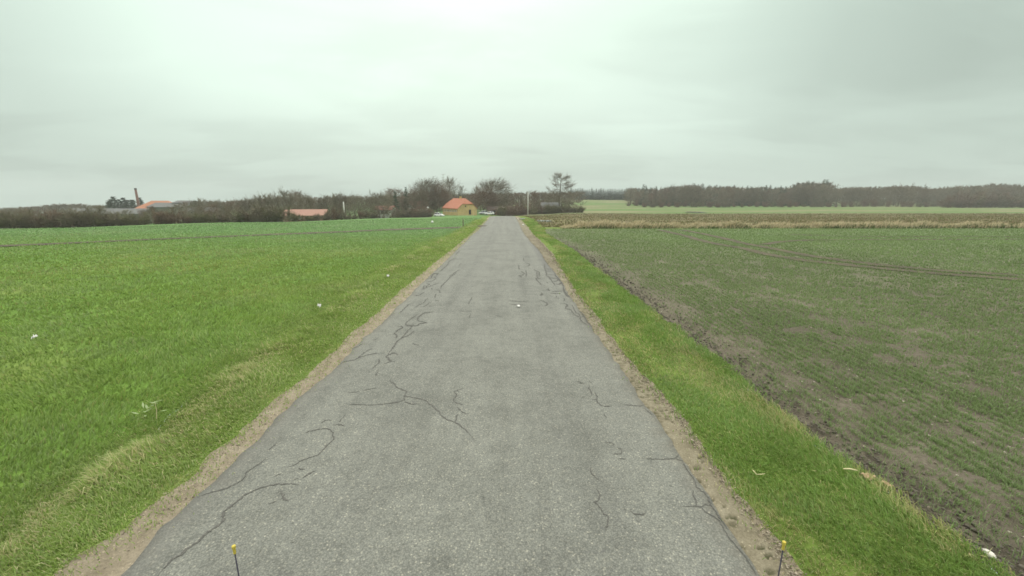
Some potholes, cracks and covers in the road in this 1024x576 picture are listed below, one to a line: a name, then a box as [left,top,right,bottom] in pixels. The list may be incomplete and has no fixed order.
crack [590,467,609,531]
crack [577,381,651,415]
crack [495,258,591,326]
crack [157,250,474,576]
